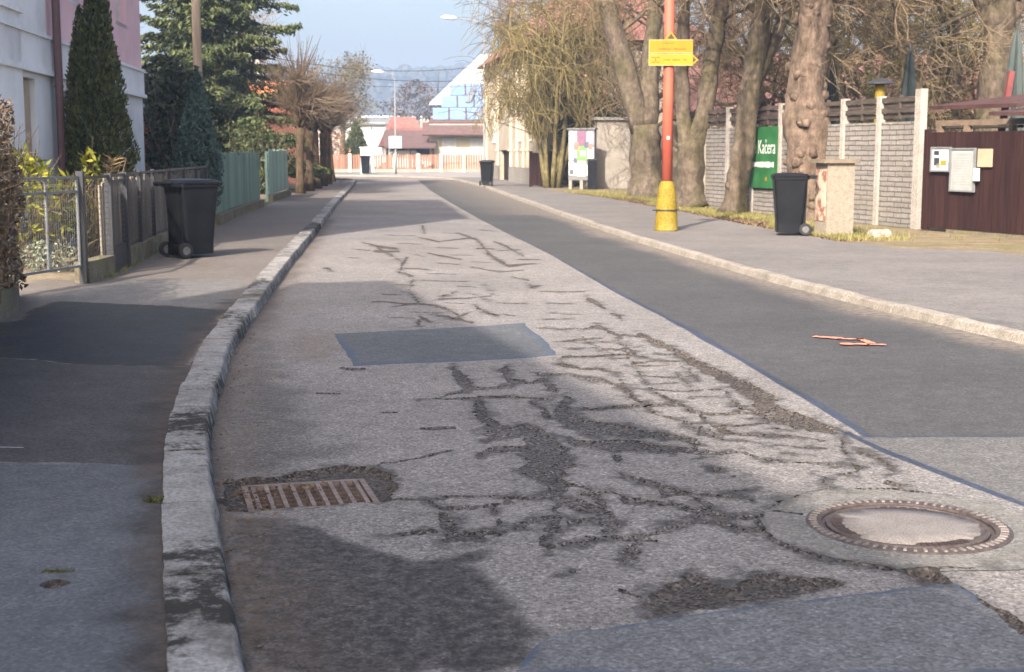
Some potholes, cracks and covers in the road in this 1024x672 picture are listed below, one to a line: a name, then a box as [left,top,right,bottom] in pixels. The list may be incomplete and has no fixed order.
pothole [639,573,846,616]
crack [618,588,642,599]
drain grate [241,478,379,512]
pothole [39,579,70,589]
crack [323,226,975,574]
manhole cover [749,488,1024,571]
